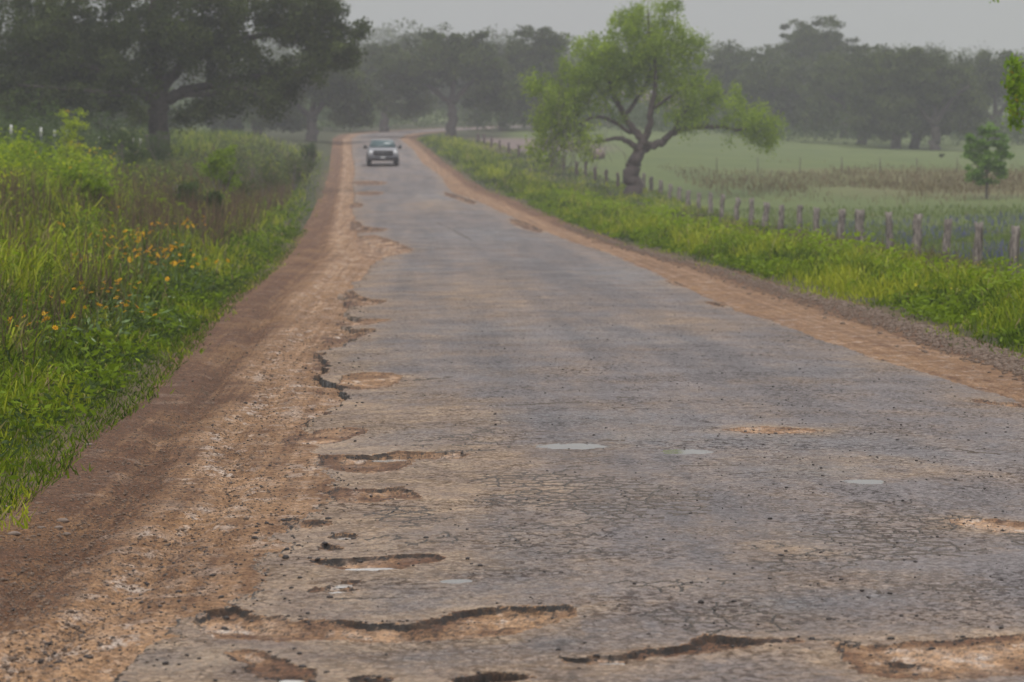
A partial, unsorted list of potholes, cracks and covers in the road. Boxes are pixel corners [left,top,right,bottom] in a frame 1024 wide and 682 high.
crack [470,464,713,555]
crack [609,577,798,635]
crack [815,638,861,646]
pothole [305,553,447,571]
crack [752,502,1024,572]
pothole [223,649,318,682]
pothole [315,450,471,474]
pothole [190,604,577,643]
crack [876,579,1020,602]
pothole [323,486,422,504]
pothole [557,633,805,665]
